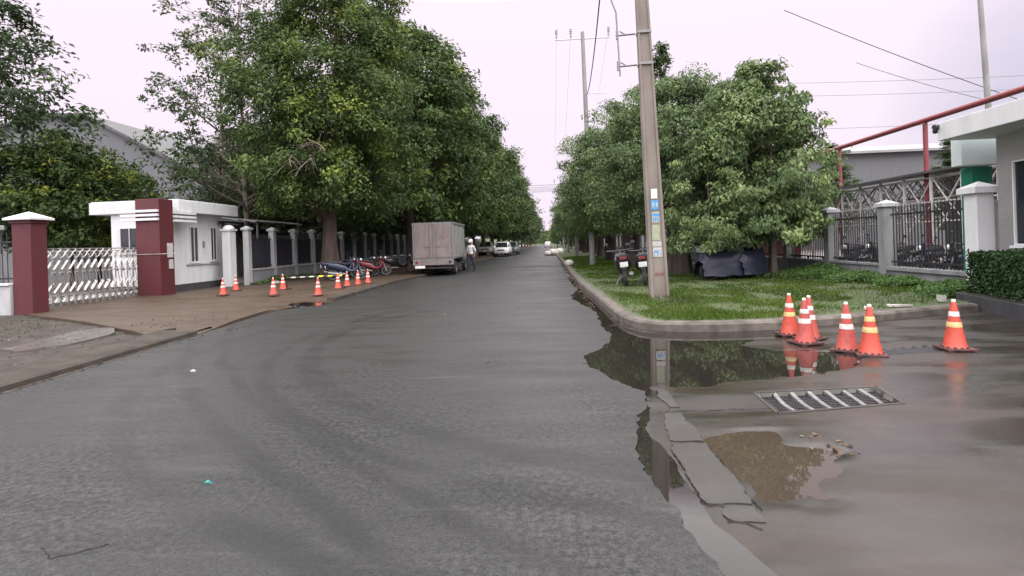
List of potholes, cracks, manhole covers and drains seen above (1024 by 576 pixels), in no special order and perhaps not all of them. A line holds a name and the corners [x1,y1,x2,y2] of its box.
crack [696,441,763,530]
drain grate [752,386,905,414]
crack [41,543,109,559]
